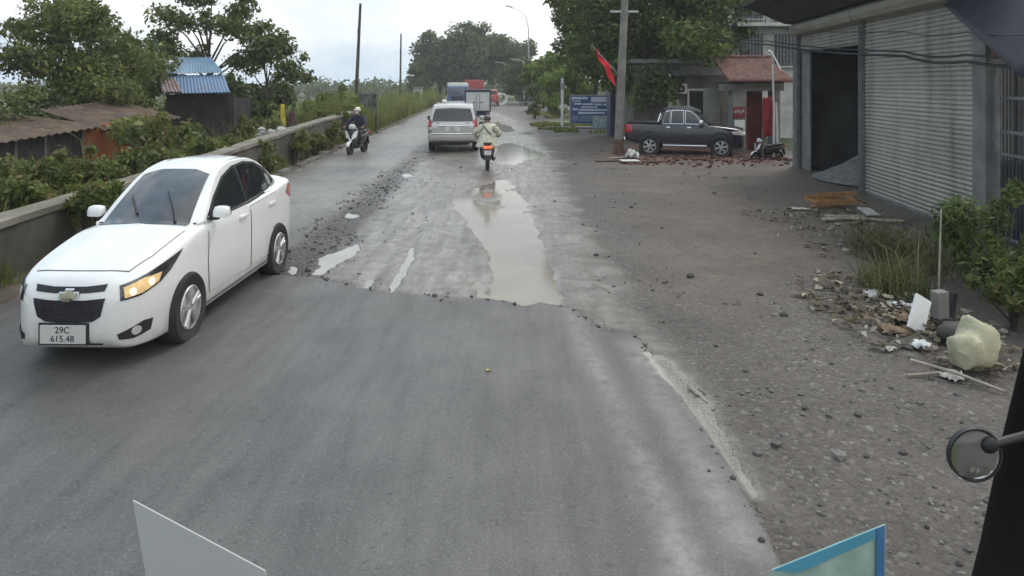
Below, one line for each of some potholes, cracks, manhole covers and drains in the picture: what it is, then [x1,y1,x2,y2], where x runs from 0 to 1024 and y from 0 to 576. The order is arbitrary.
pothole [491,142,549,166]
pothole [311,243,361,275]
pothole [445,178,574,309]
crack [687,381,717,409]
